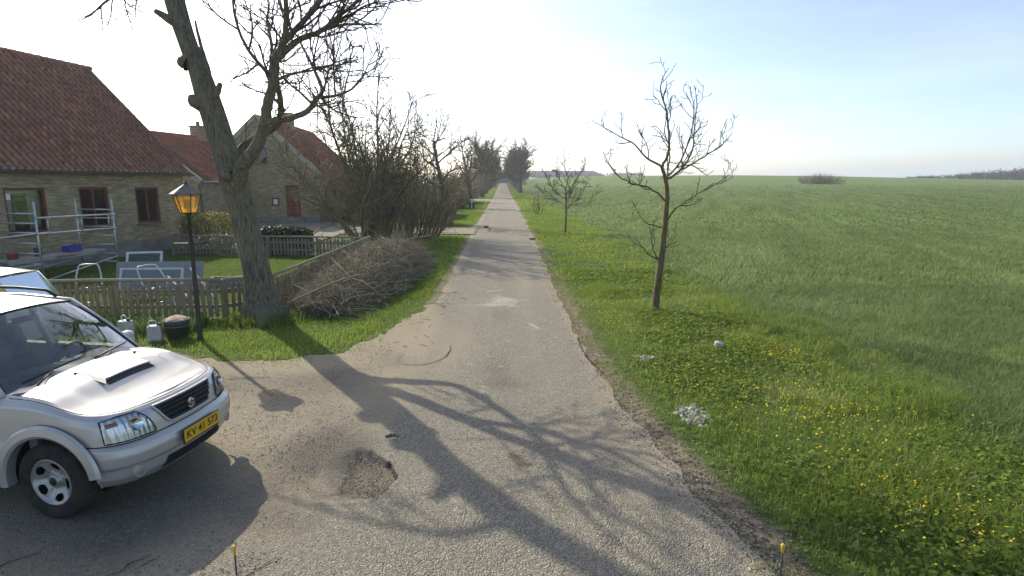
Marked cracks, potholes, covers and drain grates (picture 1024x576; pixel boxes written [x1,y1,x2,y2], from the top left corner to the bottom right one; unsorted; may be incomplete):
crack [108,554,160,576]
pothole [312,445,403,506]
pothole [381,433,404,441]
